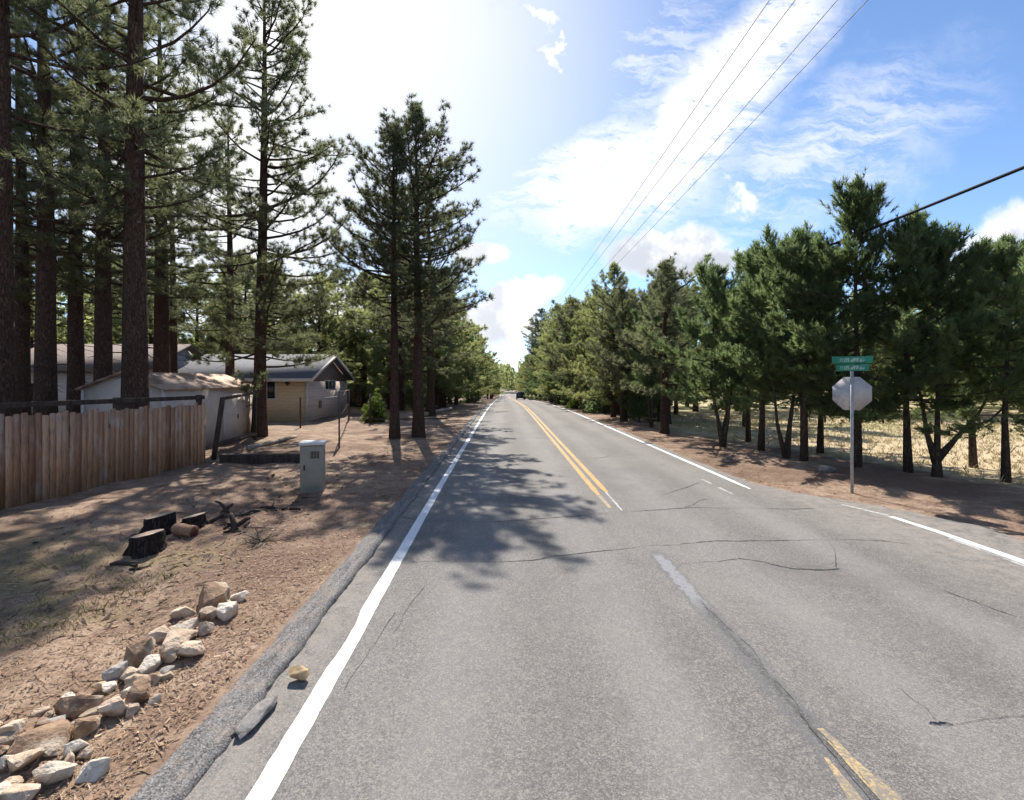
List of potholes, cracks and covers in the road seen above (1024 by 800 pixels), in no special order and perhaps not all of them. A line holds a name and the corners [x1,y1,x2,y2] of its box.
crack [424,539,897,570]
crack [344,586,425,690]
crack [404,482,808,522]
crack [699,599,871,800]
